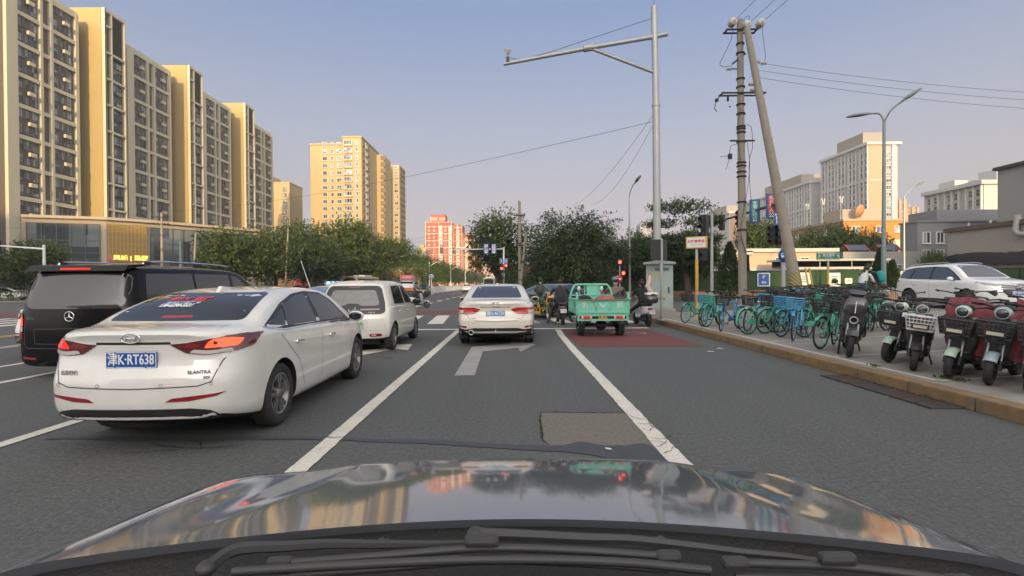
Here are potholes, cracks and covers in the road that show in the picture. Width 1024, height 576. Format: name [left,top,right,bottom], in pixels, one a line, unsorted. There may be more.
crack [123,440,236,453]
drain grate [821,374,876,384]
drain grate [852,384,915,395]
drain grate [888,394,966,409]
